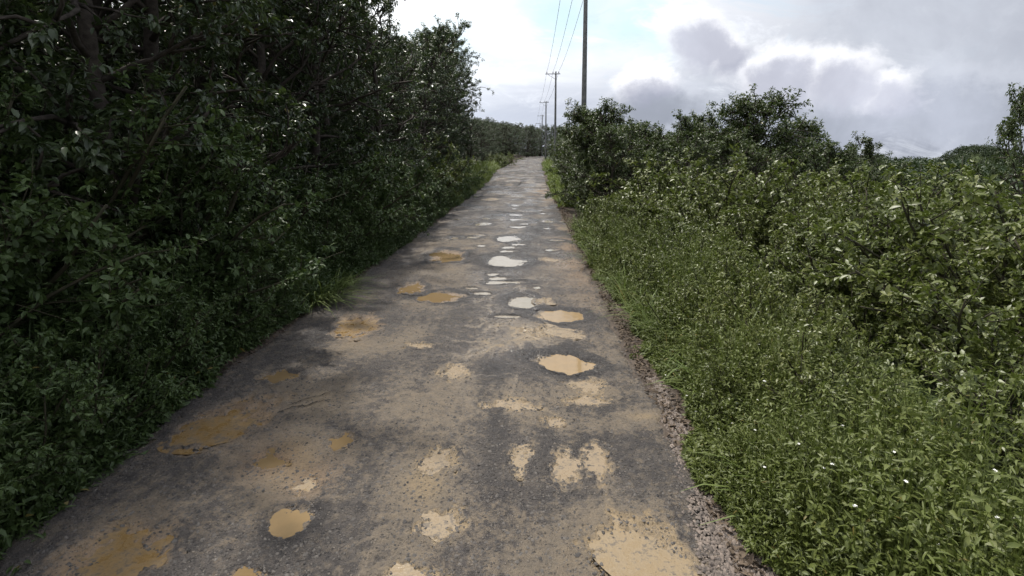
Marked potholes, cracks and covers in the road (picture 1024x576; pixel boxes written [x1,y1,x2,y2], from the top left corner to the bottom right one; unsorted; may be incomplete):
pothole [475,253,537,270]
pothole [520,348,608,377]
pothole [520,306,595,325]
pothole [323,430,362,452]
pothole [146,390,294,465]
pothole [424,247,469,266]
pothole [27,513,190,576]
pothole [256,500,327,541]
